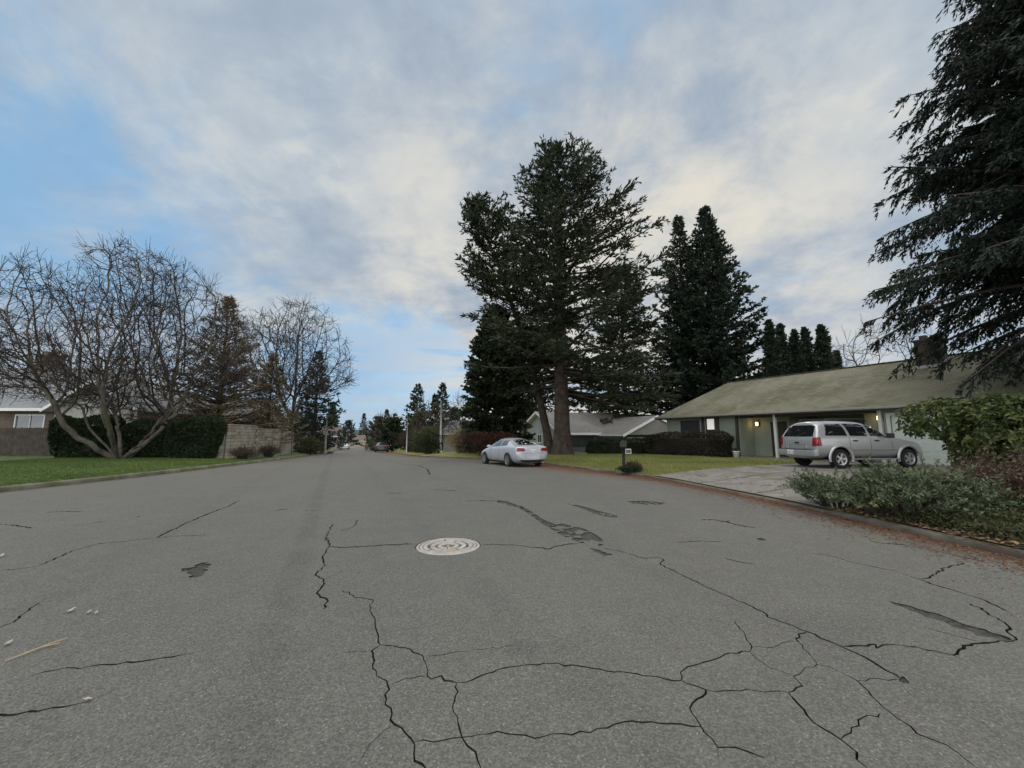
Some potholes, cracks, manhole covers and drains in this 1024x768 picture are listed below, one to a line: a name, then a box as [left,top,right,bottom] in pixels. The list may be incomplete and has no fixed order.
pothole [891,601,1012,643]
crack [1,500,240,571]
crack [0,692,110,717]
crack [315,521,403,609]
pothole [181,562,212,578]
crack [343,540,1018,768]
pothole [521,506,603,547]
manhole cover [415,537,481,555]
pothole [573,505,618,518]
crack [35,650,204,675]
